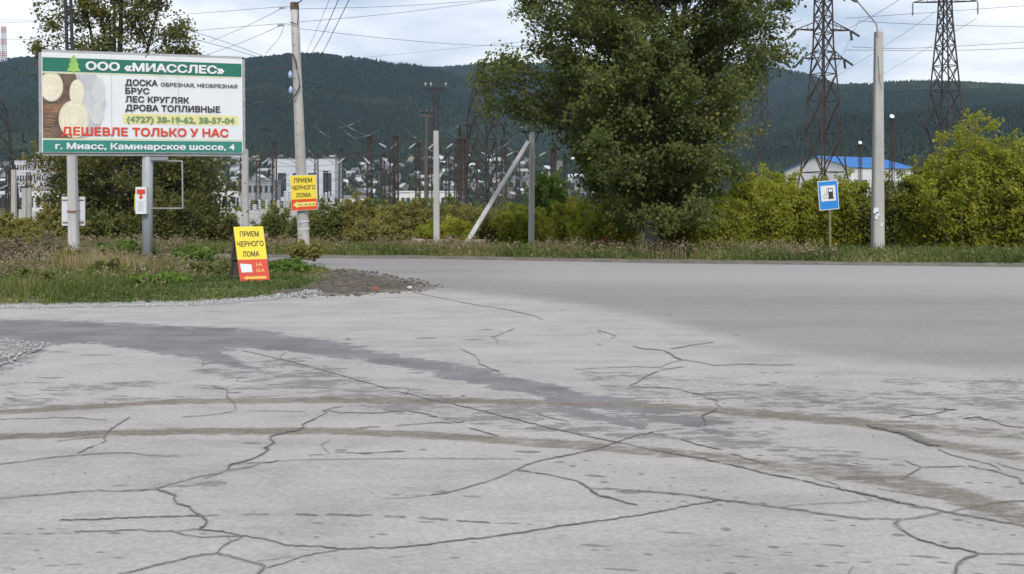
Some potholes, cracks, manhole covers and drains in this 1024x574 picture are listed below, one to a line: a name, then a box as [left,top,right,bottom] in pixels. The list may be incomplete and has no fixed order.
crack [0,342,1024,574]
